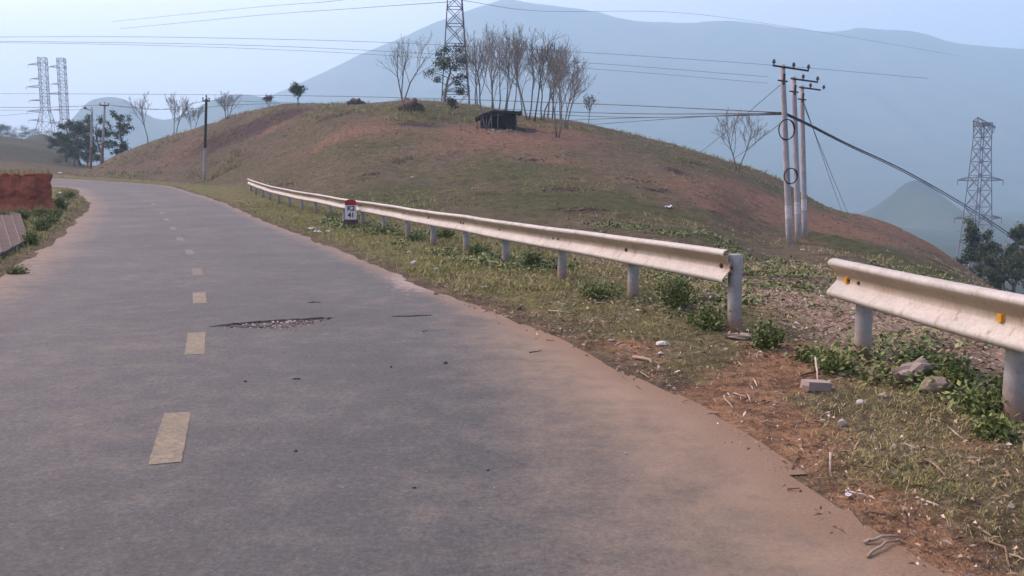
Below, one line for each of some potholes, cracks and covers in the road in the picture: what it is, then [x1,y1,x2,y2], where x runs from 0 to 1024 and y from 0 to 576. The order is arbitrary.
pothole [210,317,334,329]
